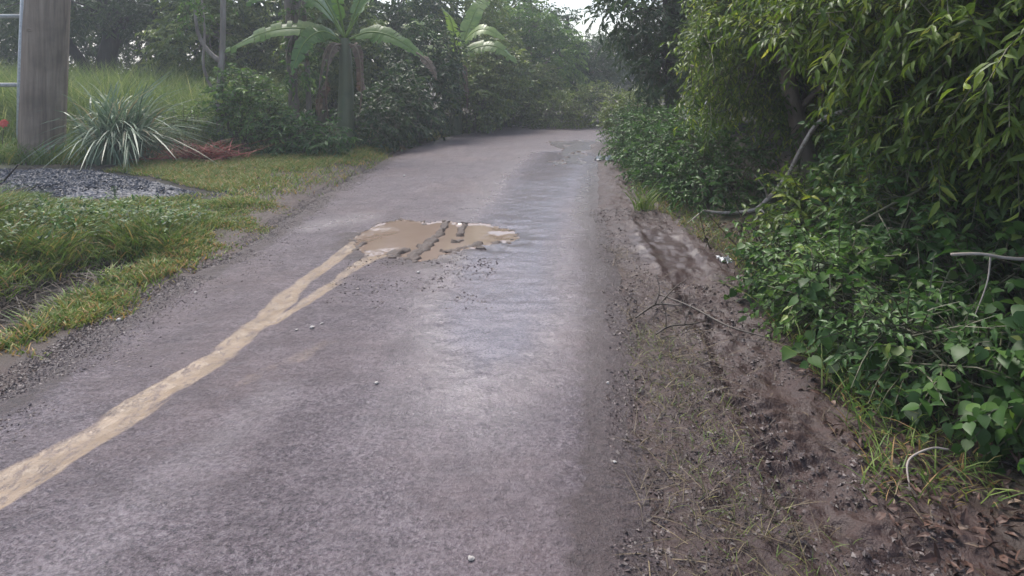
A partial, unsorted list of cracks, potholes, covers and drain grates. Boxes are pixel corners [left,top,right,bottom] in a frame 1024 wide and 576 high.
pothole [348,217,520,263]
